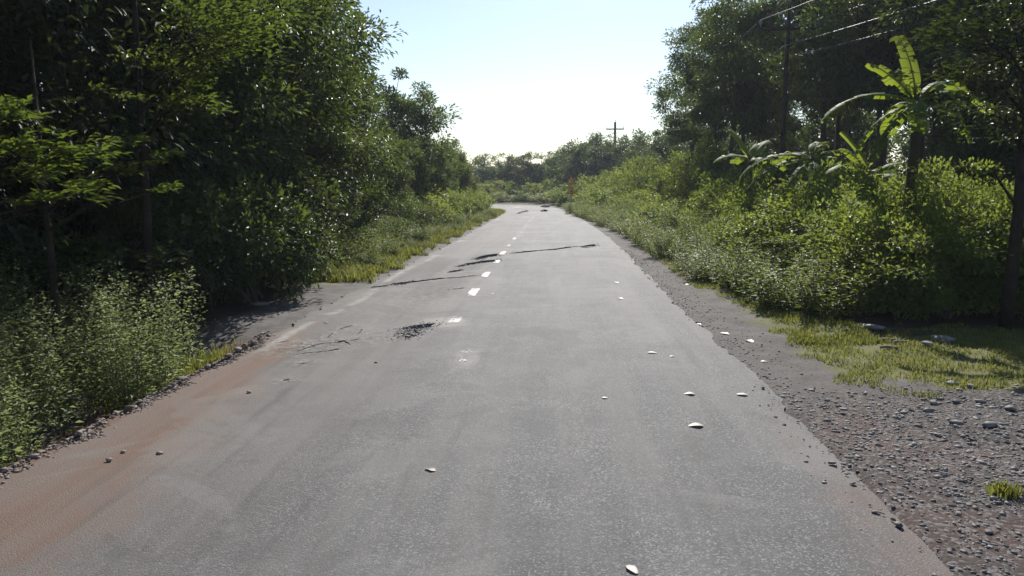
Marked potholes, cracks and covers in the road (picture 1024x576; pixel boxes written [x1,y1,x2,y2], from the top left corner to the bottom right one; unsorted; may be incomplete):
crack [367,269,476,290]
crack [506,246,579,254]
pothole [380,320,440,341]
